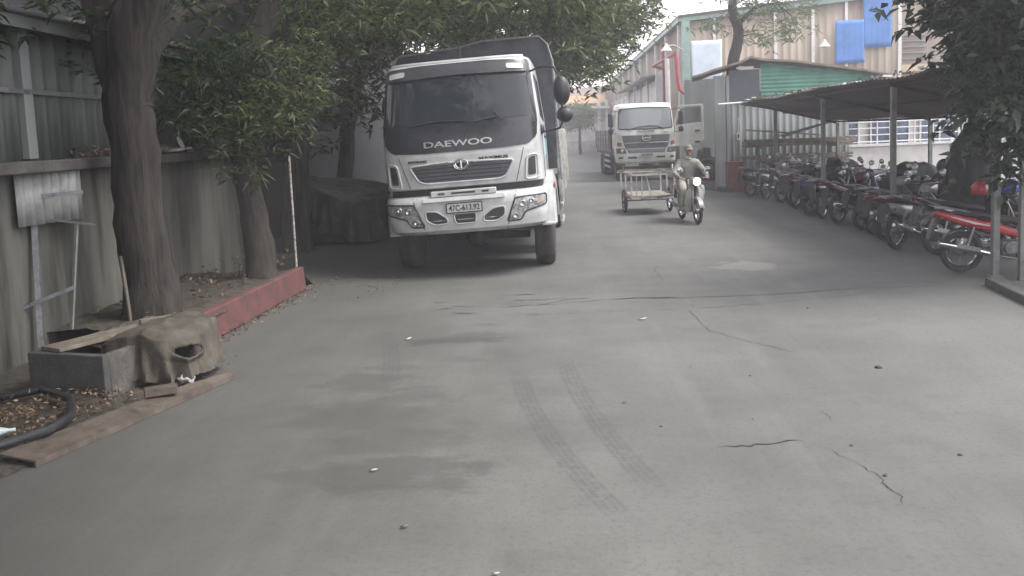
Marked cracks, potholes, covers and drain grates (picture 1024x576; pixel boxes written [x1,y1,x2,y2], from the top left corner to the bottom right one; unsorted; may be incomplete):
crack [434,265,926,418]
